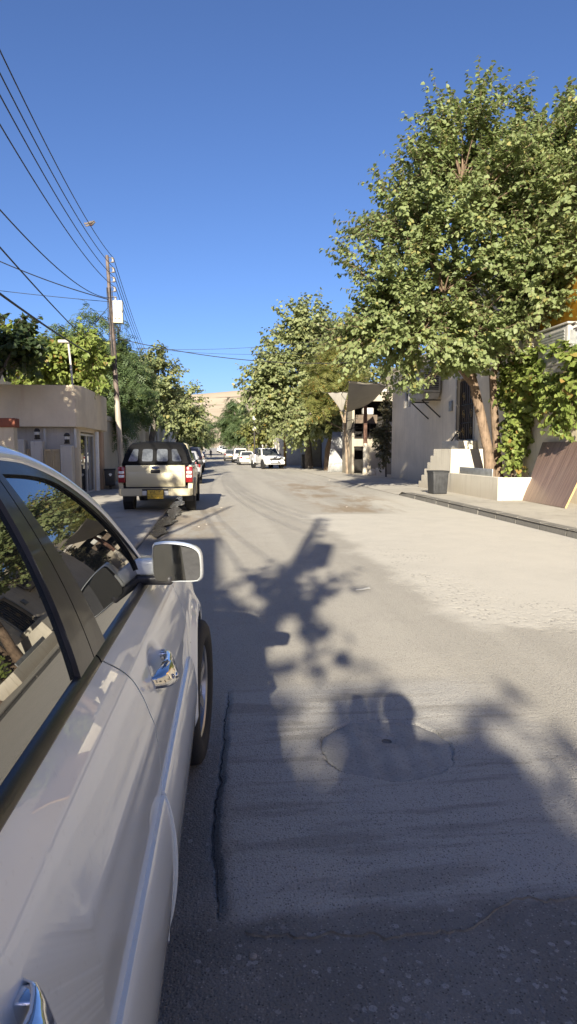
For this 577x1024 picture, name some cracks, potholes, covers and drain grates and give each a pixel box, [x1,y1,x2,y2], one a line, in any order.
manhole cover [322,721,454,782]
crack [245,896,577,941]
